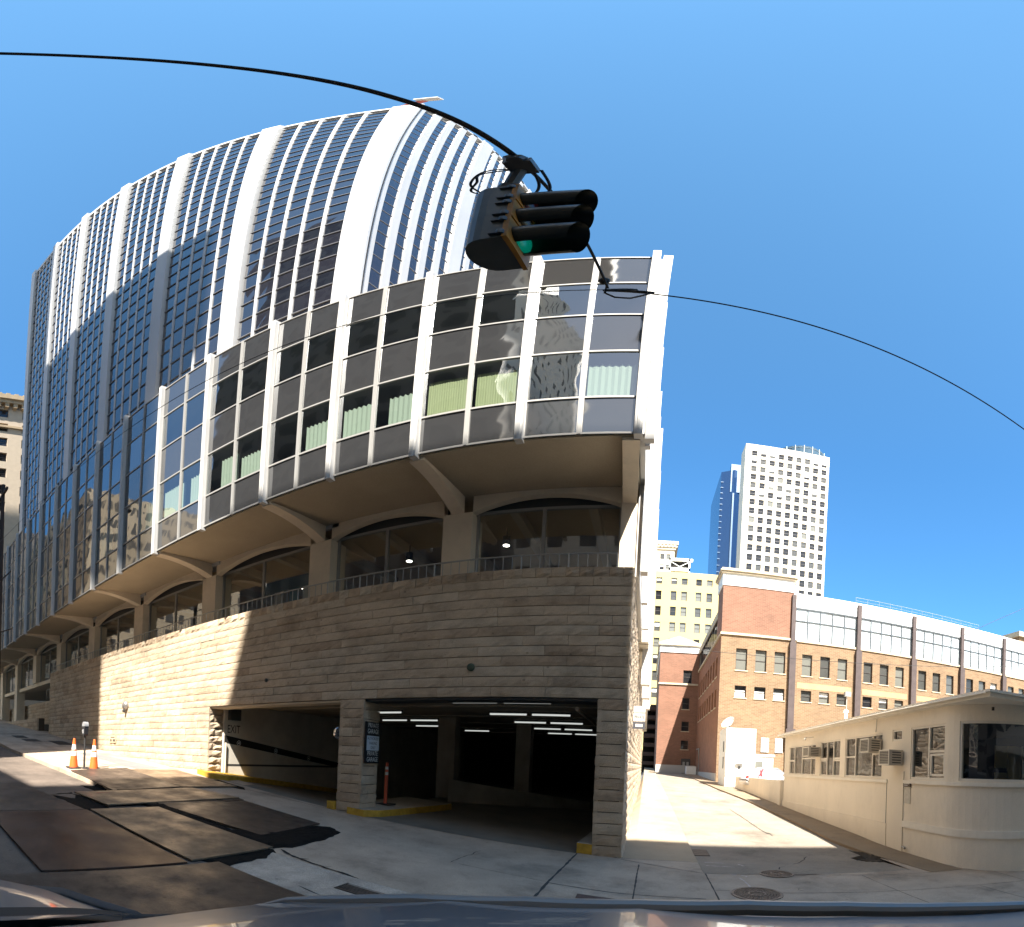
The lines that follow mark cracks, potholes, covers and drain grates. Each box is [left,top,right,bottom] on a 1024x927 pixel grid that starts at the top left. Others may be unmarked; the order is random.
crack [281,849,359,879]
drain grate [334,883,385,894]
manhole cover [759,870,794,878]
manhole cover [731,887,784,901]
